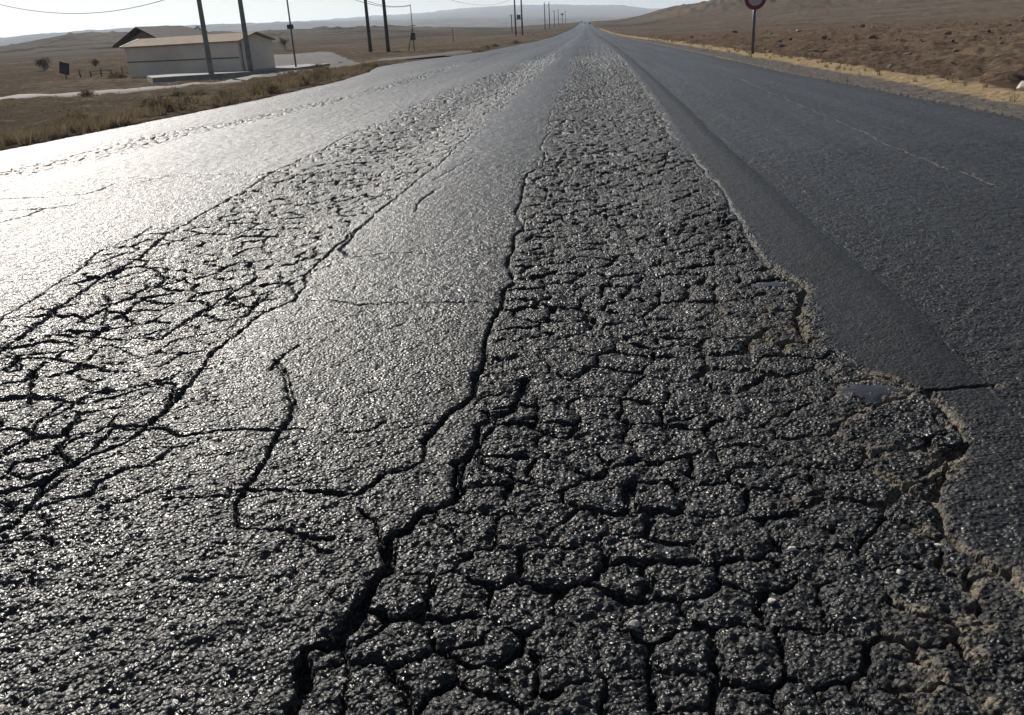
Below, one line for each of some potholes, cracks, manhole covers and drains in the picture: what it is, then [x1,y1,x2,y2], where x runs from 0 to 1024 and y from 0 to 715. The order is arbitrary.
crack [315,43,1005,715]
crack [0,44,570,632]
